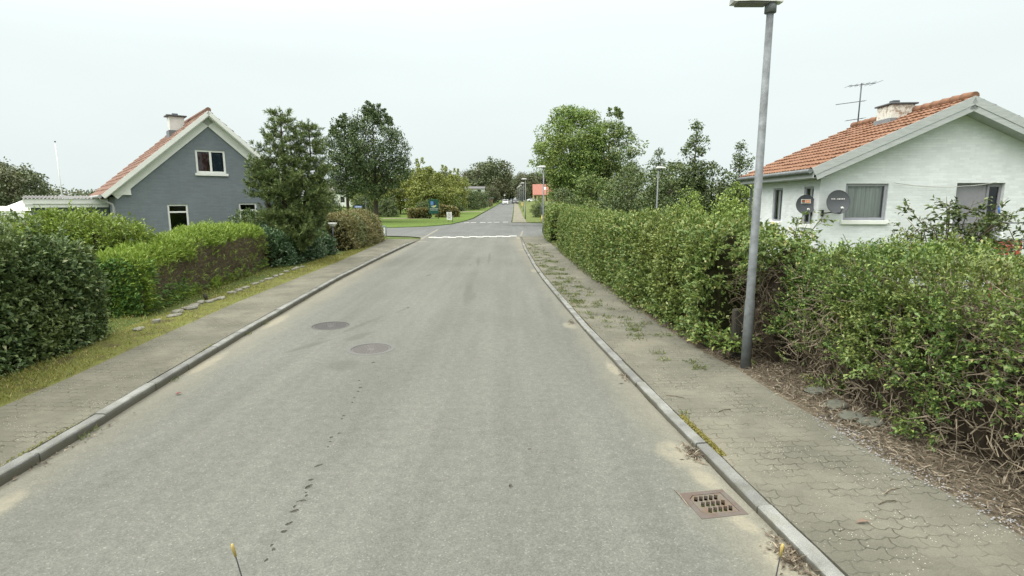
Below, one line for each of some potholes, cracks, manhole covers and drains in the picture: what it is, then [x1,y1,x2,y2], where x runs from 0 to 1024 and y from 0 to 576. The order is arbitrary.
manhole cover [311,321,350,330]
drain grate [679,489,748,519]
manhole cover [347,343,395,355]
